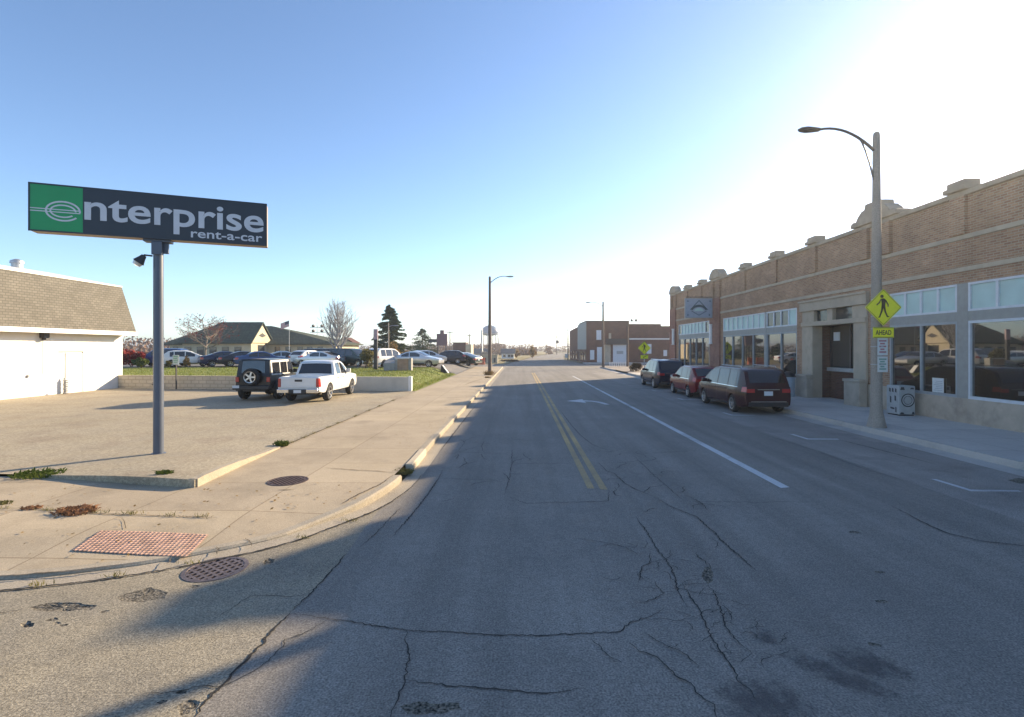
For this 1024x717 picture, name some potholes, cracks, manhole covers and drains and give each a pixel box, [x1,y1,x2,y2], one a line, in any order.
pothole [400,702,462,715]
pothole [30,602,97,612]
crack [0,413,788,717]
pothole [117,587,168,603]
manhole cover [266,476,309,486]
drain grate [180,557,249,582]
